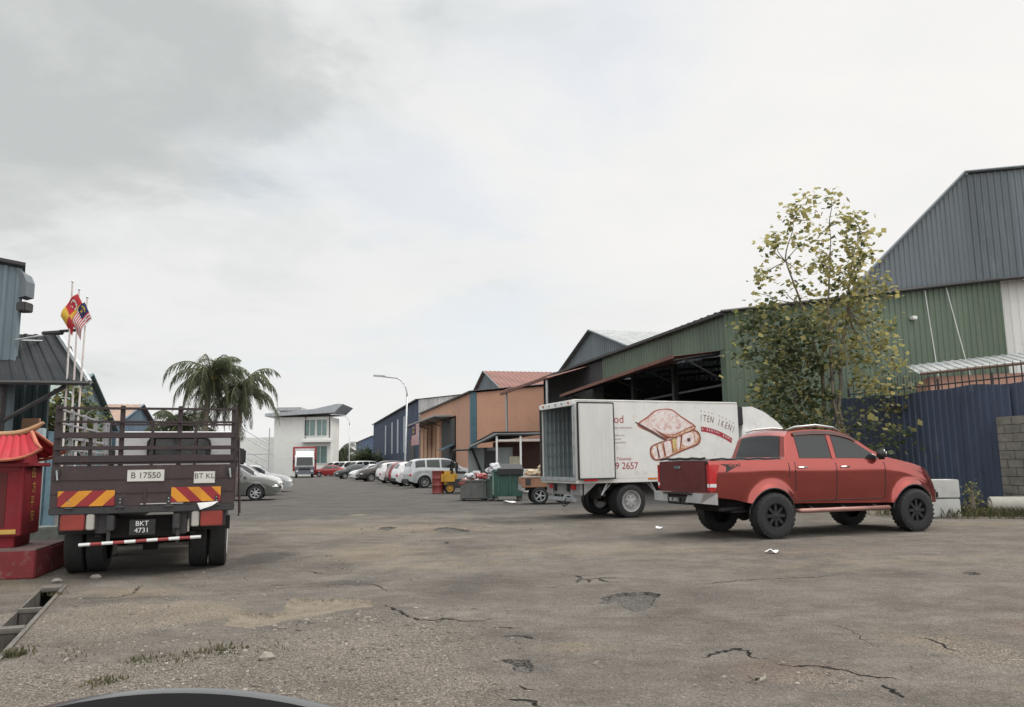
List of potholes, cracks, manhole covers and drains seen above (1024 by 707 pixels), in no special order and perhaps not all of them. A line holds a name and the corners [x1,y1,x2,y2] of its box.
crack [708,574,841,584]
crack [697,648,905,698]
crack [271,553,533,639]
pothole [500,659,534,674]
crack [82,585,141,599]
crack [507,685,542,707]
pothole [598,592,661,612]
